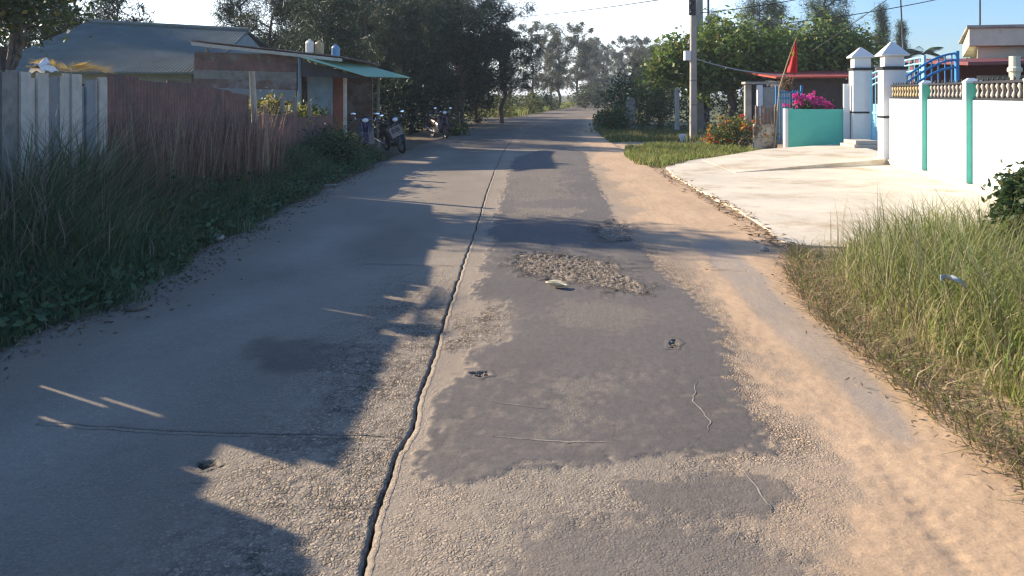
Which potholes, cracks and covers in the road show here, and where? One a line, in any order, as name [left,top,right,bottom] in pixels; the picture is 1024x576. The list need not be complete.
crack [489,400,547,409]
pothole [187,457,225,473]
pothole [500,252,649,295]
crack [691,381,773,545]
crack [39,421,402,441]
pothole [588,220,642,243]
pothole [663,337,685,350]
pothole [464,369,497,379]
